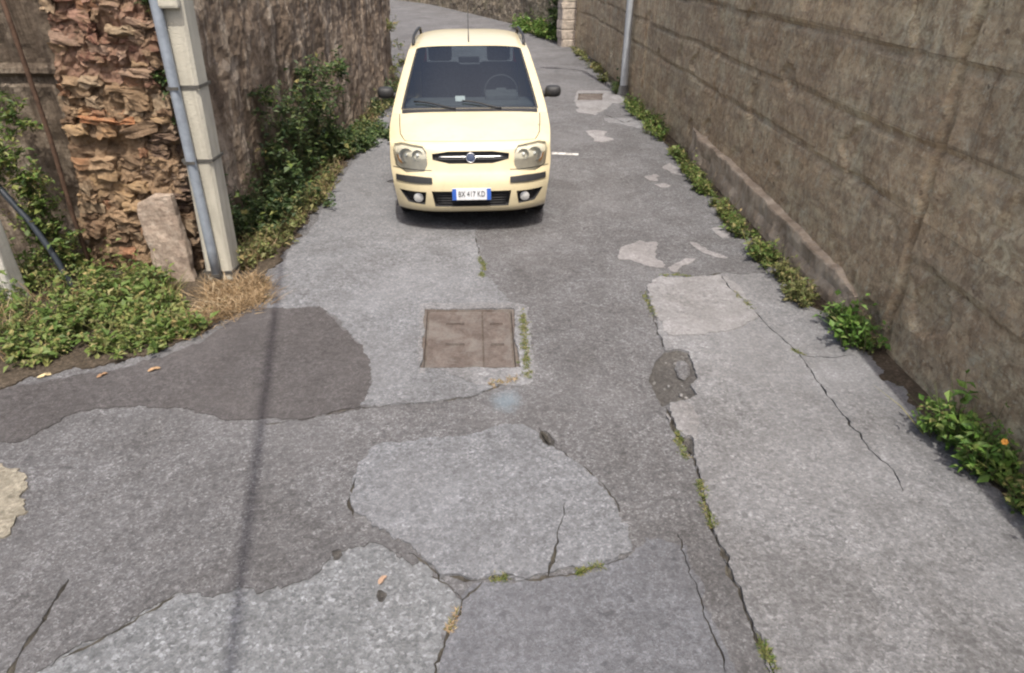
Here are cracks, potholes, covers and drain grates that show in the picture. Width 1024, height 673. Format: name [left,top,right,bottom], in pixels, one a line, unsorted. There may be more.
crack [648,301,769,671]
crack [7,580,175,673]
crack [541,431,620,512]
pothole [649,351,697,407]
manhole cover [420,309,520,368]
crack [408,506,624,673]
crack [347,482,355,516]
